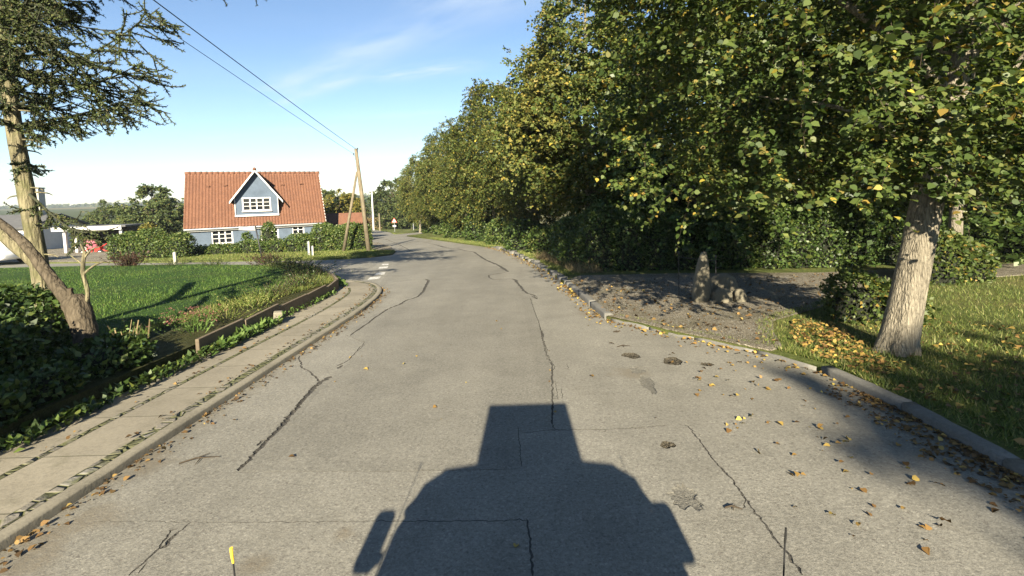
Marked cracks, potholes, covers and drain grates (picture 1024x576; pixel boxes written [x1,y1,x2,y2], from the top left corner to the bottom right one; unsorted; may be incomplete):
pothole [663,357,683,365]
crack [129,523,189,575]
crack [685,425,803,575]
